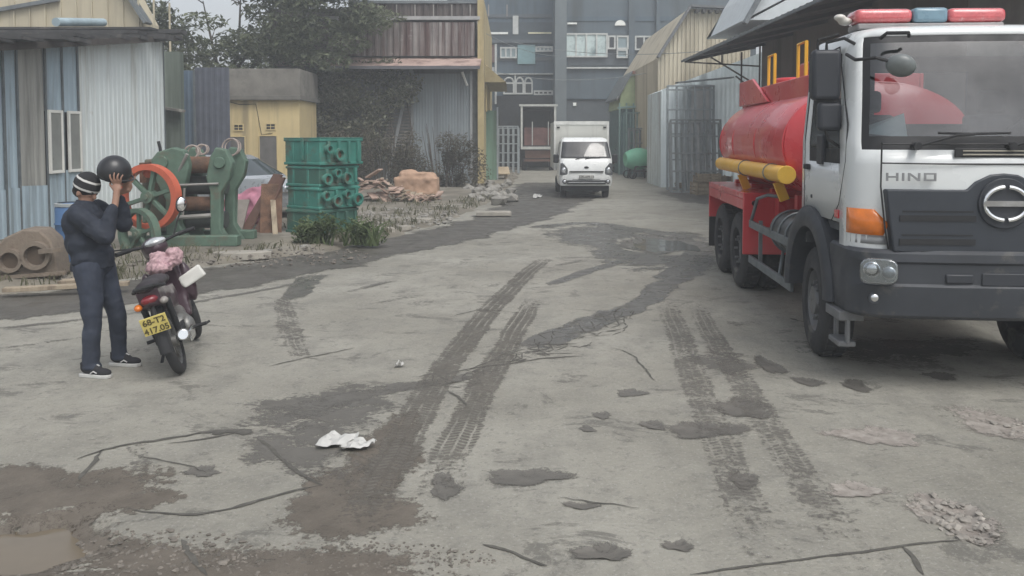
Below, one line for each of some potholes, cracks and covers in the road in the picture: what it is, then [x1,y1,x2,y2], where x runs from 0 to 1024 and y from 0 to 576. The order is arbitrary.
pothole [0,502,151,576]
crack [77,429,323,515]
pothole [902,487,1008,547]
crack [902,546,924,574]
crack [483,544,548,566]
crack [615,348,654,380]
